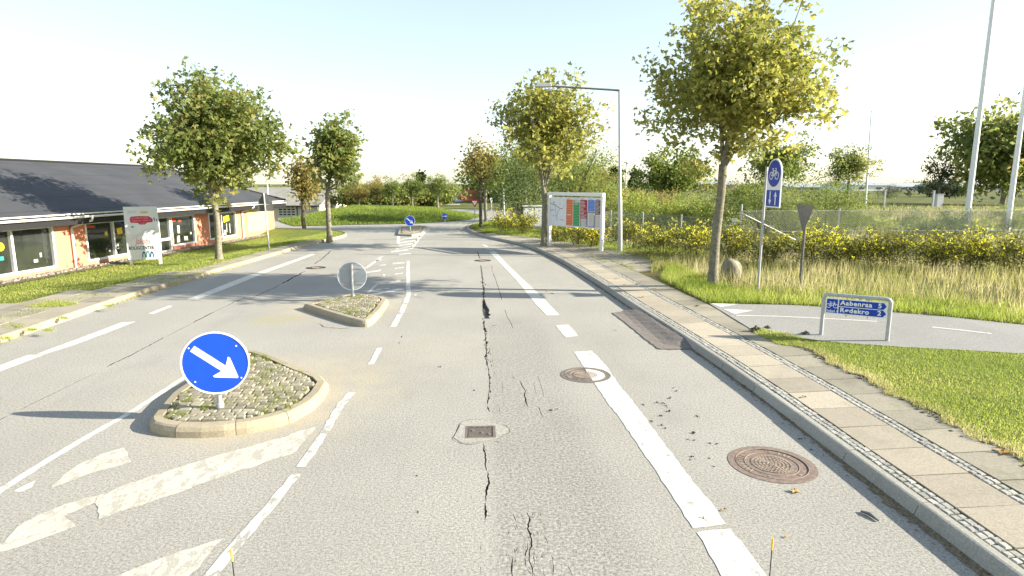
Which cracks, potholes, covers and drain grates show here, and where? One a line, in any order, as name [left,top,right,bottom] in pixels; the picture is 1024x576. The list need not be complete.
crack [480,512,572,576]
crack [452,252,544,523]
drain grate [465,426,496,438]
manhole cover [560,367,611,383]
manhole cover [728,446,818,484]
